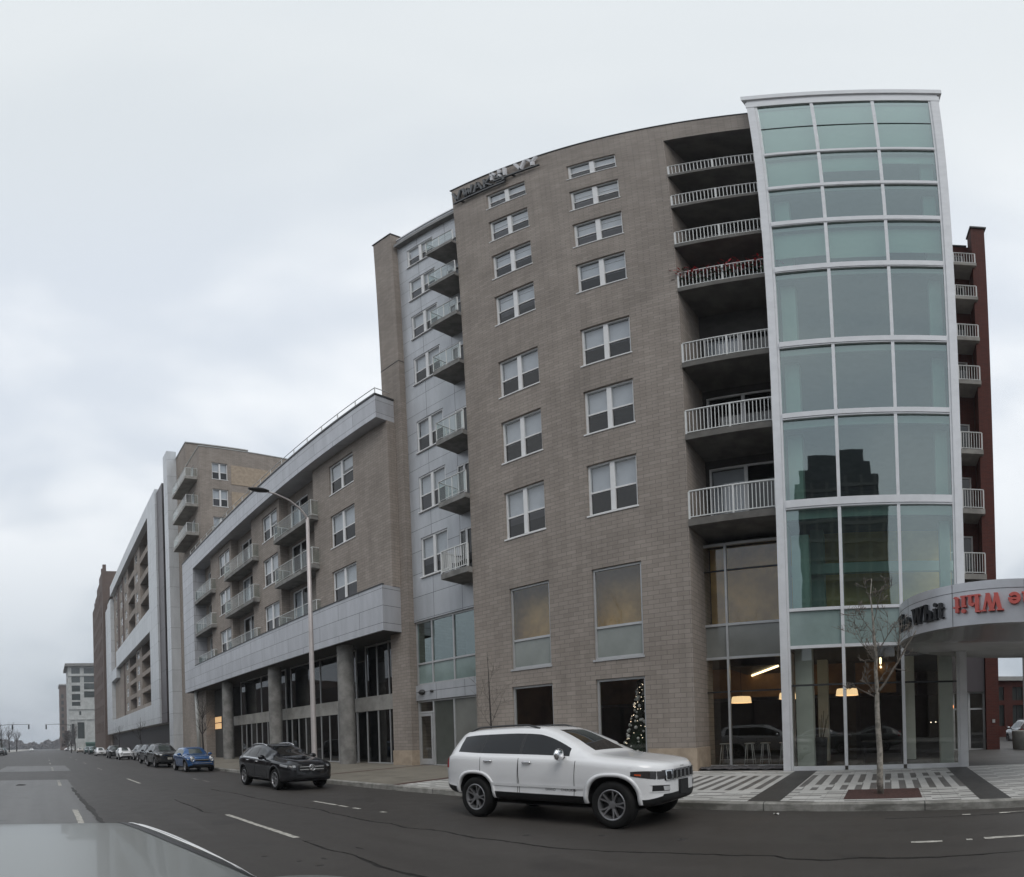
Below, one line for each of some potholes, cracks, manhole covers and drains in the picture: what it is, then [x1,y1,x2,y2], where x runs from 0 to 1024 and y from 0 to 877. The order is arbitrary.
crack [71,787,105,823]
crack [302,840,427,877]
crack [212,789,1017,861]
